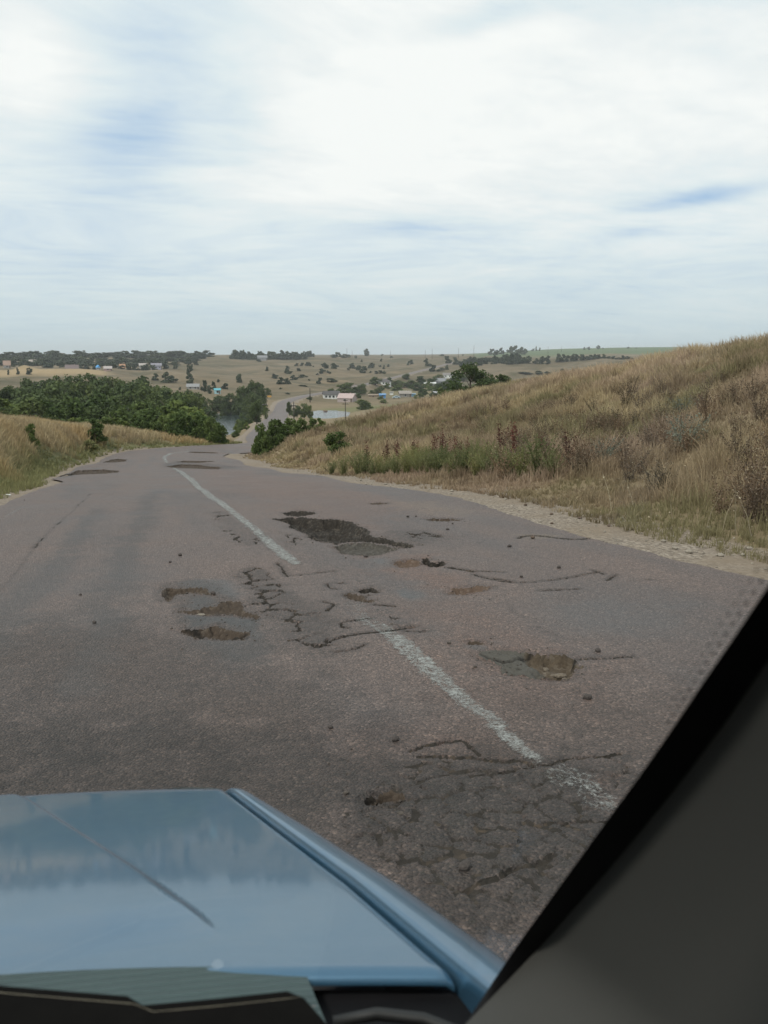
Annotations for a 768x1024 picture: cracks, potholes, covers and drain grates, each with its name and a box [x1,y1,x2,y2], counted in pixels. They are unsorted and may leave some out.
pothole [272,517,413,548]
pothole [394,560,421,568]
pothole [479,649,583,681]
pothole [448,585,491,595]
crack [344,740,630,905]
pothole [178,601,260,620]
pothole [421,558,447,567]
pothole [162,587,215,602]
pothole [371,790,405,806]
crack [447,567,614,591]
crack [240,564,421,649]
